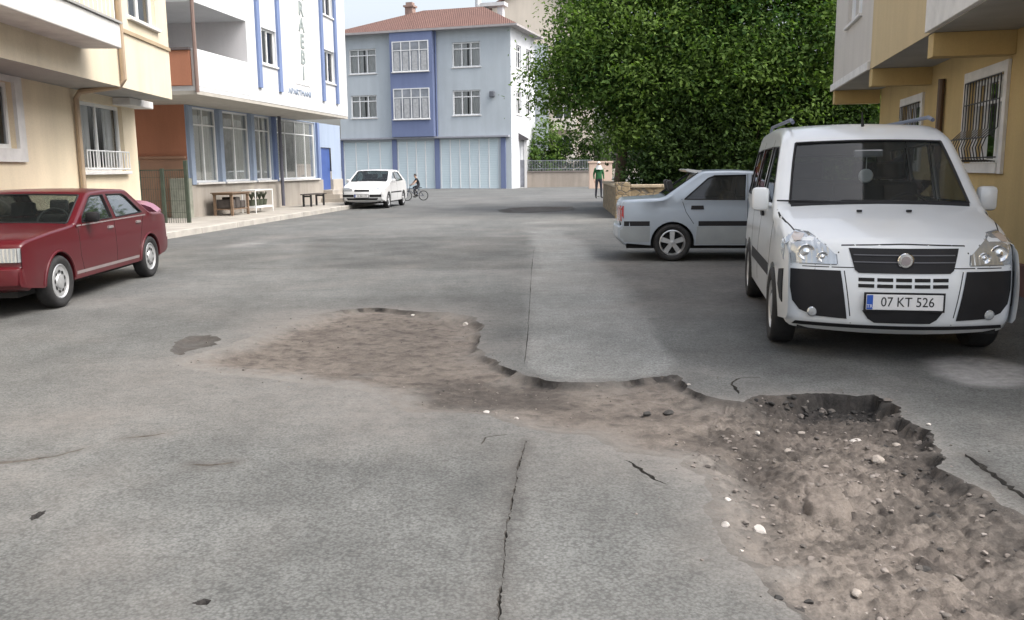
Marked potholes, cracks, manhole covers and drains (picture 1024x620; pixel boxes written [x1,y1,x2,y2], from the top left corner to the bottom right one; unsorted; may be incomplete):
pothole [679,393,1024,620]
crack [626,460,666,484]
pothole [173,308,729,459]
crack [524,253,534,364]
crack [0,448,84,464]
crack [730,377,759,394]
crack [481,434,527,620]
